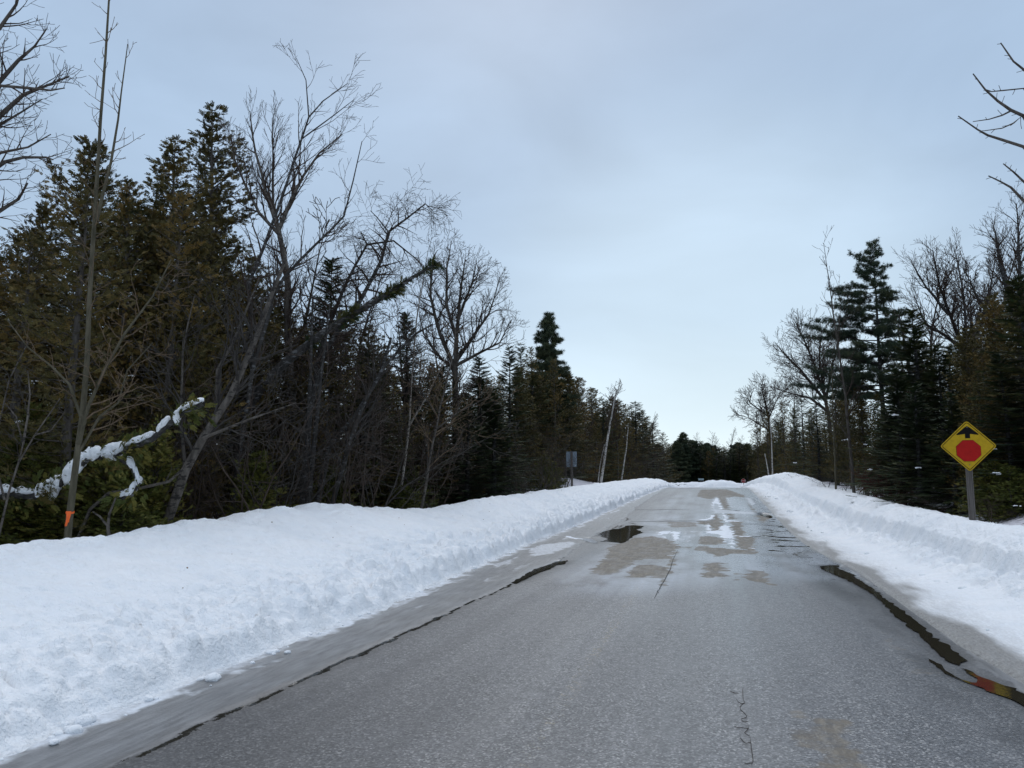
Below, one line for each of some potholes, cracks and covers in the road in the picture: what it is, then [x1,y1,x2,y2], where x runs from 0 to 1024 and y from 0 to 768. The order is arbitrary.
crack [730,691,753,764]
